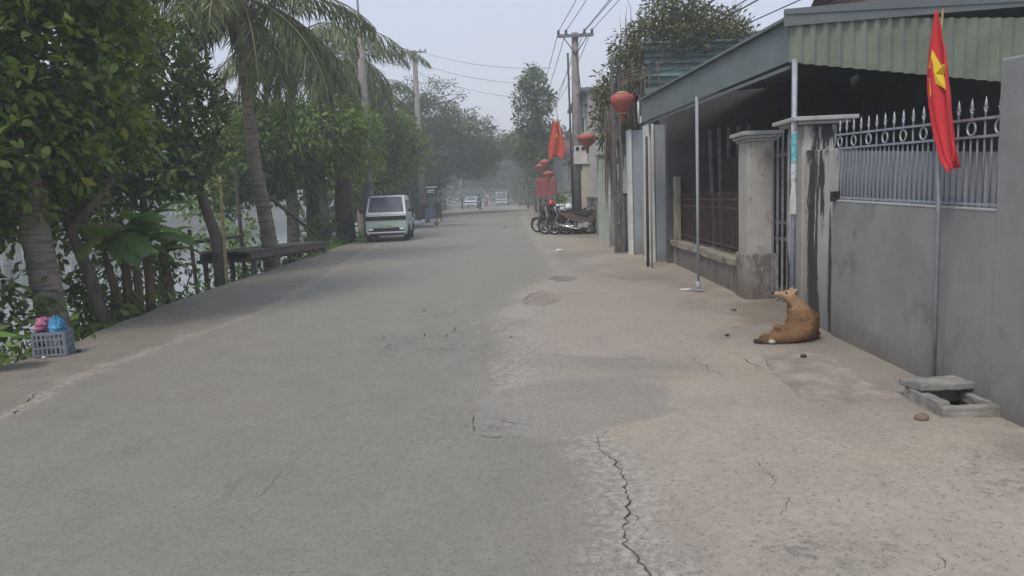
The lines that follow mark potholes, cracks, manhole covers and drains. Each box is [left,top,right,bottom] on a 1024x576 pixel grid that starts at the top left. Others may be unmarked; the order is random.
crack [597,431,652,576]
crack [467,401,517,438]
crack [382,309,517,351]
